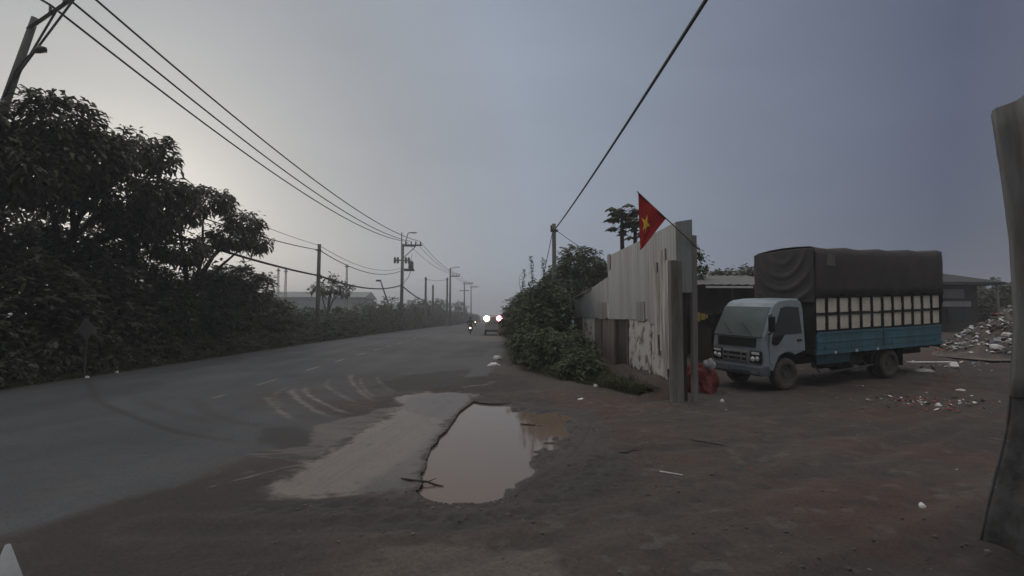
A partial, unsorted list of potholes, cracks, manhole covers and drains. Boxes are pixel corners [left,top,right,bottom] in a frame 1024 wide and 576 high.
pothole [417,401,591,504]
